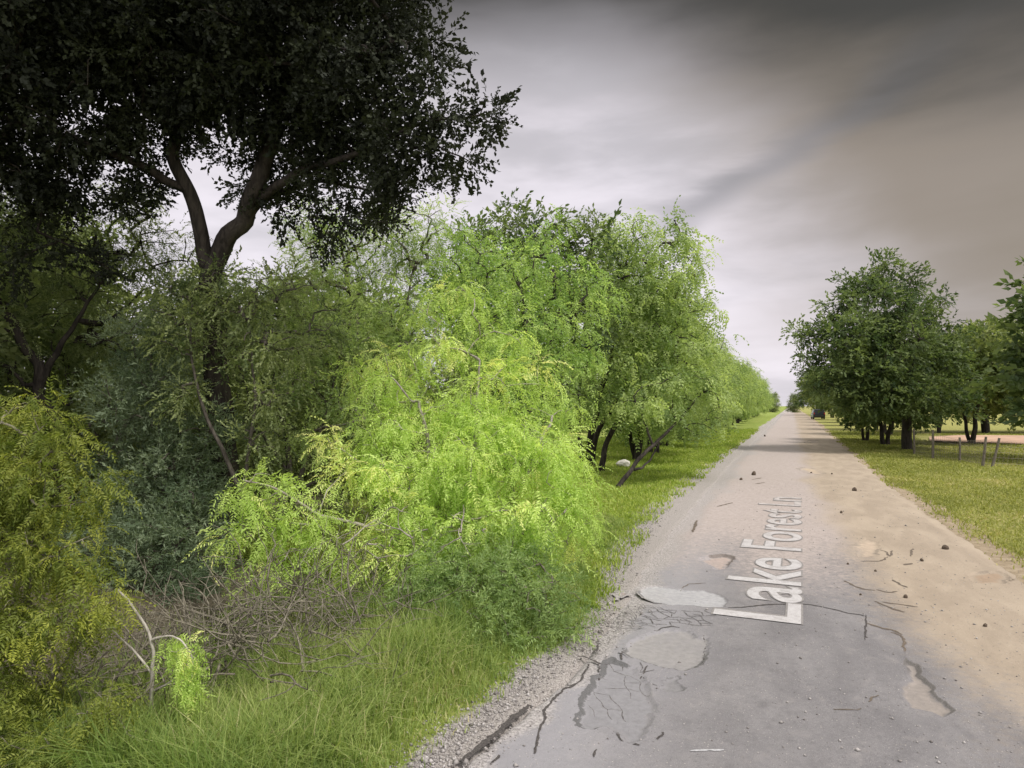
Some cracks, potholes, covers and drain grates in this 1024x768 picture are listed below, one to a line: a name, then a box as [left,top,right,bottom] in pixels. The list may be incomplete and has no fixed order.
pothole [895,649,959,719]
pothole [849,538,883,558]
crack [612,548,917,663]
pothole [697,554,737,570]
crack [460,643,664,763]
